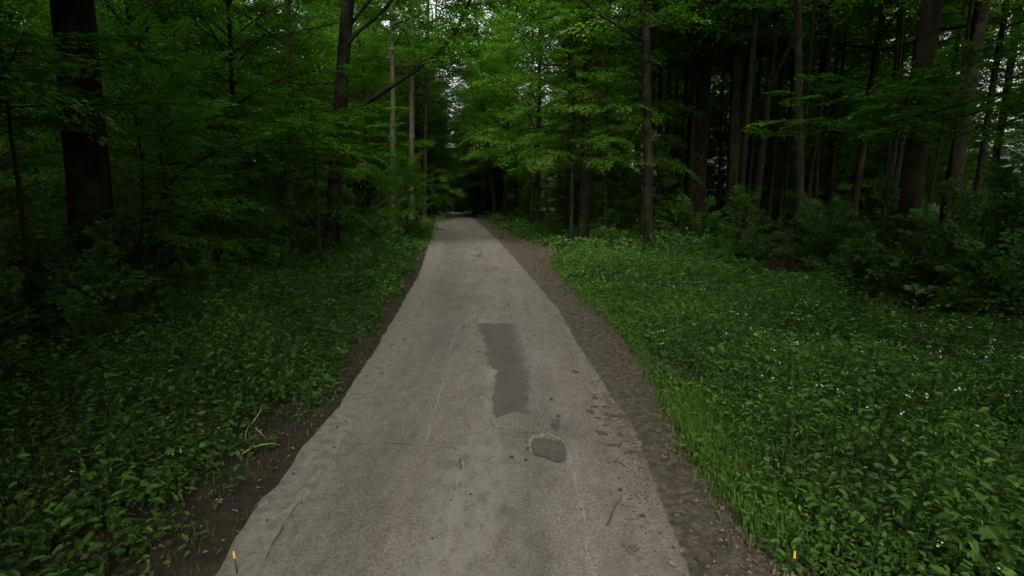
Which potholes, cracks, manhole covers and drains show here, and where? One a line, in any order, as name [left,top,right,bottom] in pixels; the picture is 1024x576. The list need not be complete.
crack [265,501,302,559]
crack [355,303,512,559]
